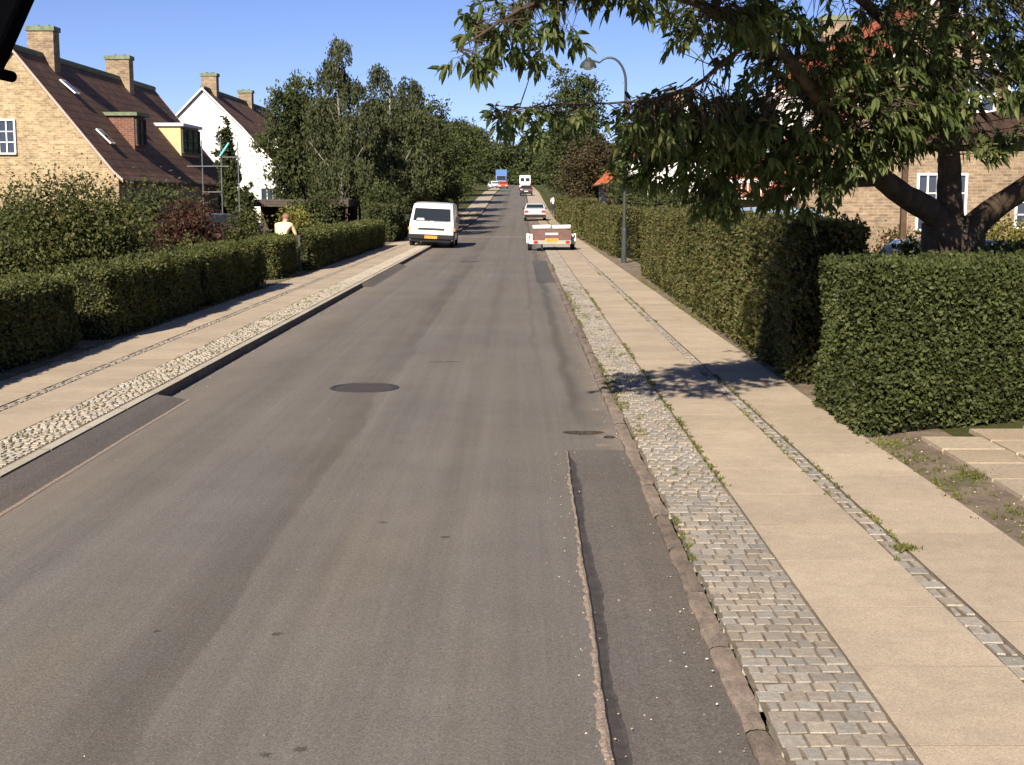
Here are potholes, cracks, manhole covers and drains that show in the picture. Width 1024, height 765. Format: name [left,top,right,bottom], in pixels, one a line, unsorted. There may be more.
manhole cover [330,383,399,393]
